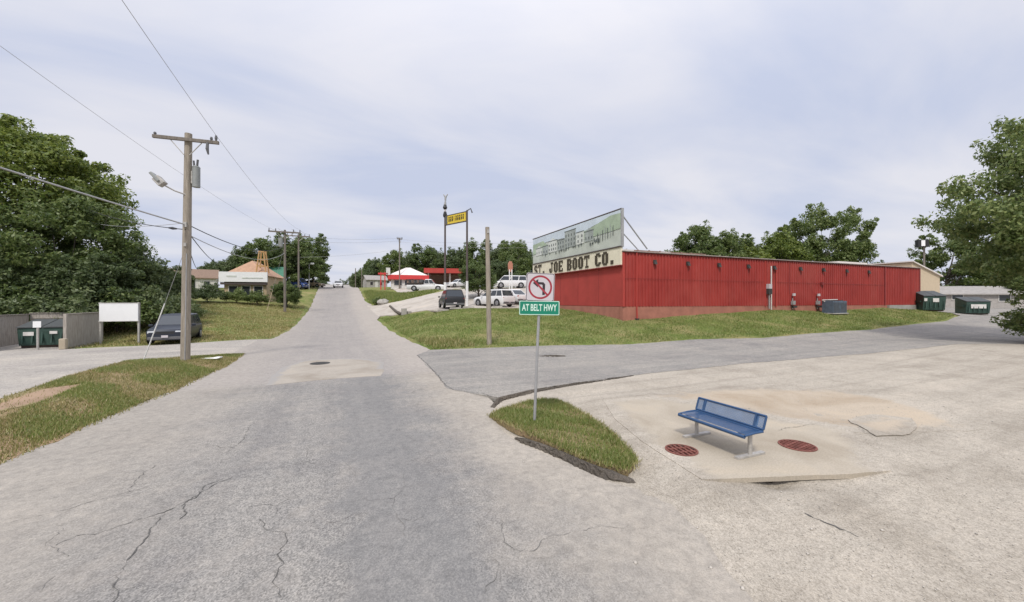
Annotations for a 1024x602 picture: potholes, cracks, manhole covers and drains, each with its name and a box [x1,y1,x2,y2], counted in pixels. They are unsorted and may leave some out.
crack [484,525,617,598]
crack [252,502,288,596]
crack [56,477,232,602]
